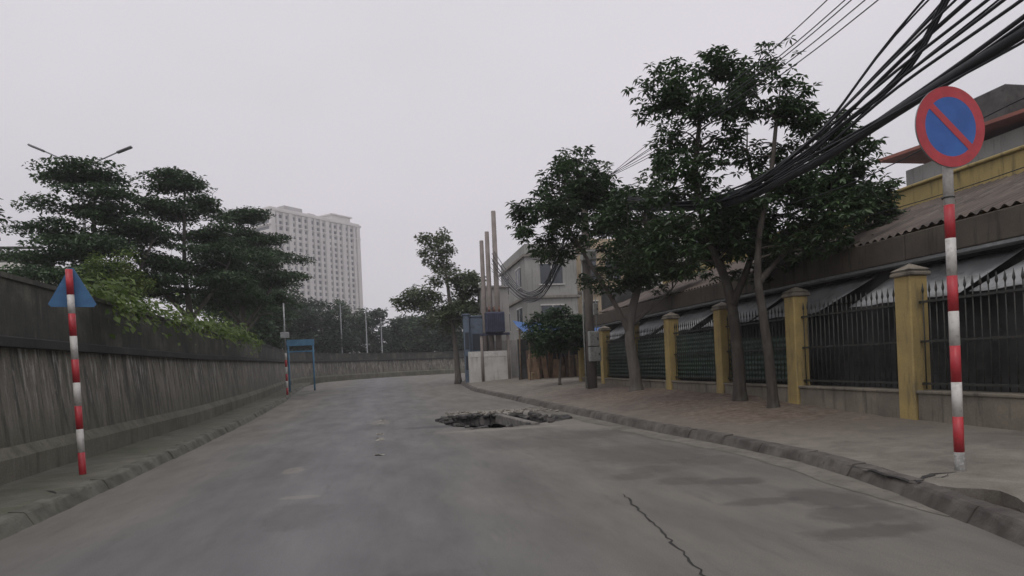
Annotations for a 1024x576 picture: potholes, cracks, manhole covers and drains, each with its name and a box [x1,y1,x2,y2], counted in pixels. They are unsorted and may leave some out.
crack [847,465,951,483]
pothole [435,406,572,429]
crack [623,494,705,576]
